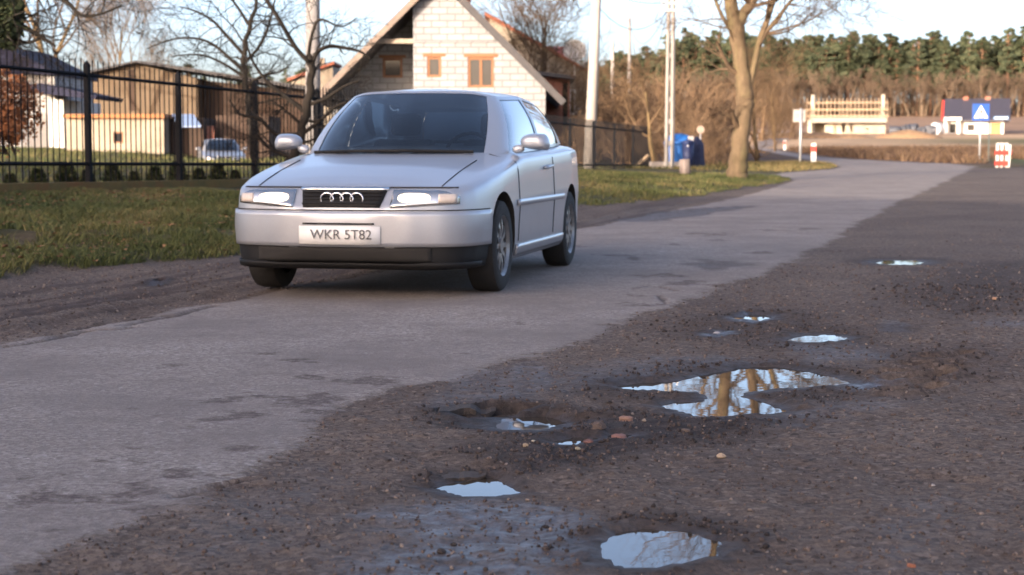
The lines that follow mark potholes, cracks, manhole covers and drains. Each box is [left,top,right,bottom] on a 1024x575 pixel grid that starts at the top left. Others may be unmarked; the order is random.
pothole [764,332,875,345]
pothole [145,278,173,286]
pothole [408,468,556,500]
pothole [719,309,796,324]
pothole [694,328,745,337]
pothole [845,258,950,266]
pothole [430,399,587,435]
pothole [579,517,754,573]
pothole [594,361,882,420]
